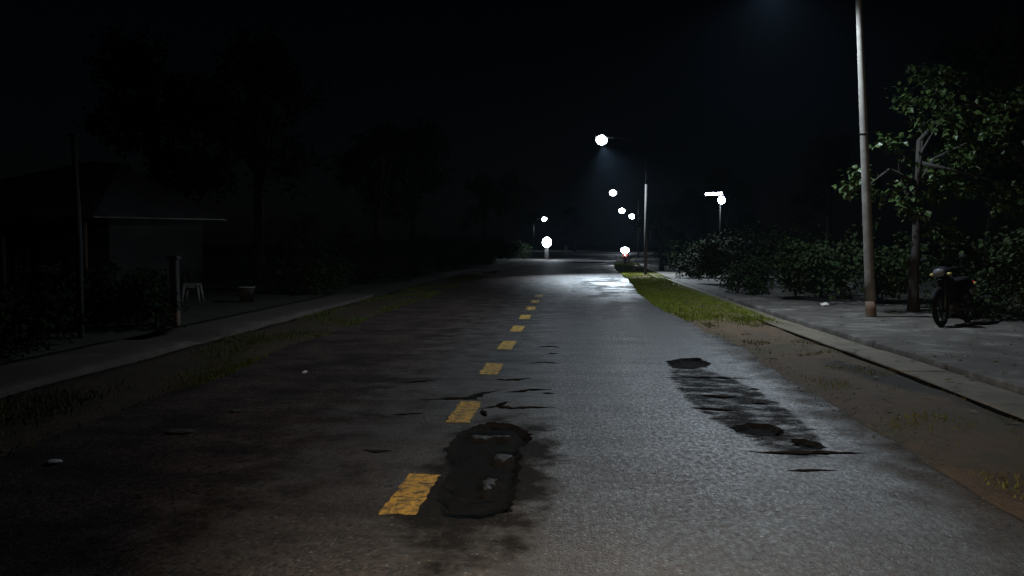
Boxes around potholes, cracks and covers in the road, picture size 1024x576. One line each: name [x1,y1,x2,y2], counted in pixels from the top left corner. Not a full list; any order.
crack [749,450,860,472]
pothole [729,423,786,437]
crack [393,346,560,417]
pothole [435,422,533,520]
pothole [665,358,711,369]
pothole [790,438,827,449]
